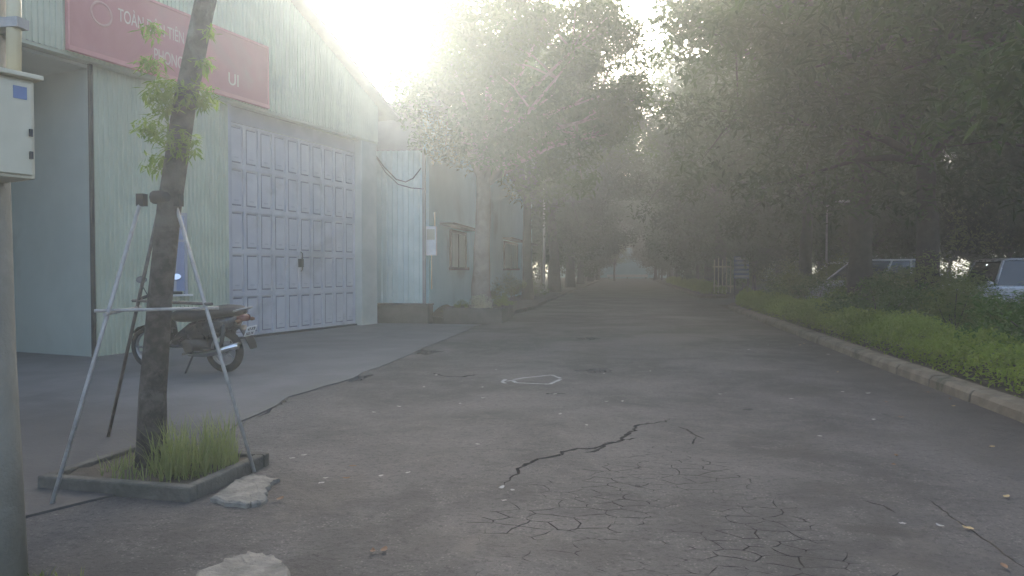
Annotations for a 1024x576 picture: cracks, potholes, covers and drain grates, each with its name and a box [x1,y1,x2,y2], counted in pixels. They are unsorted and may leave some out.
crack [504,419,704,485]
crack [467,445,899,576]
